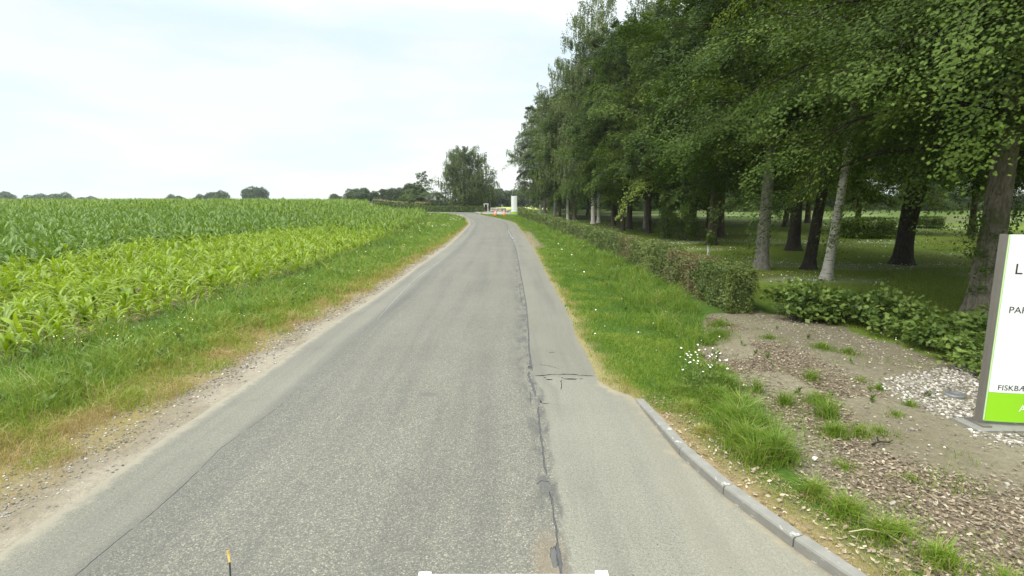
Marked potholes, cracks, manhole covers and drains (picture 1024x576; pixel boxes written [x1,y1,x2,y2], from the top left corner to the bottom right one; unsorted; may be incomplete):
crack [536,352,589,404]
